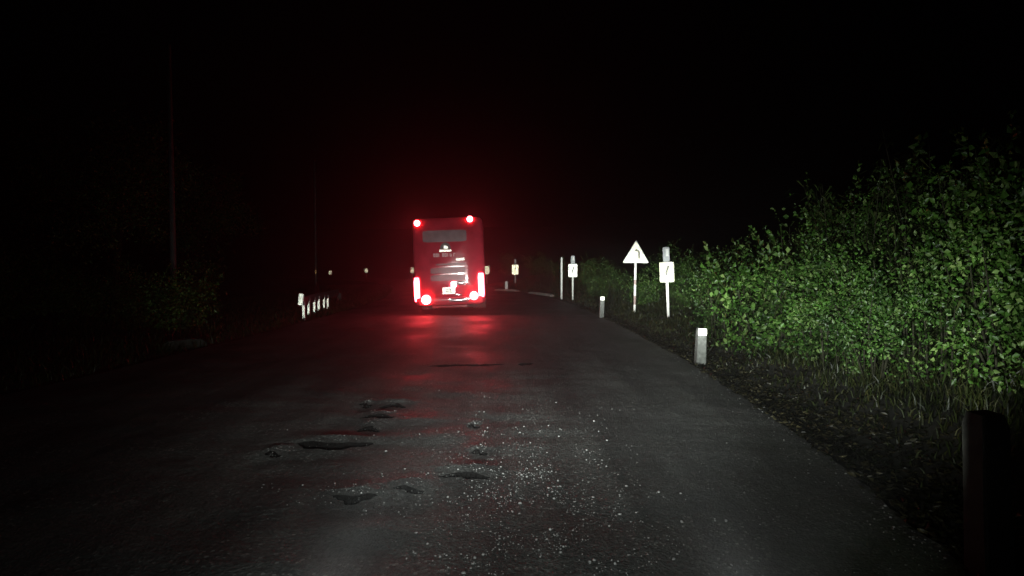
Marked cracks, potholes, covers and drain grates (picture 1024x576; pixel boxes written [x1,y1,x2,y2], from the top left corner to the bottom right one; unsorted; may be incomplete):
pothole [394,485,424,494]
pothole [438,471,490,479]
pothole [331,493,378,505]
pothole [298,441,373,450]
